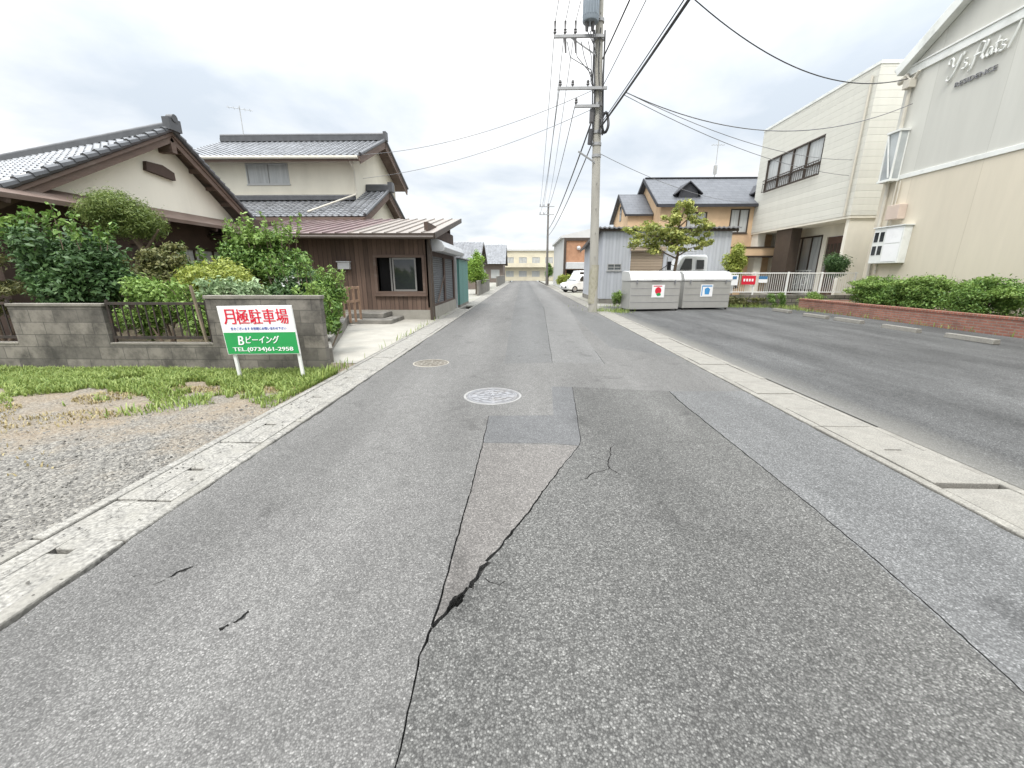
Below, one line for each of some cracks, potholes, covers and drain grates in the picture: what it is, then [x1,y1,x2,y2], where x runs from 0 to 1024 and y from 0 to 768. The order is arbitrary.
crack [394,416,621,768]
manhole cover [464,388,522,405]
manhole cover [413,359,449,367]
